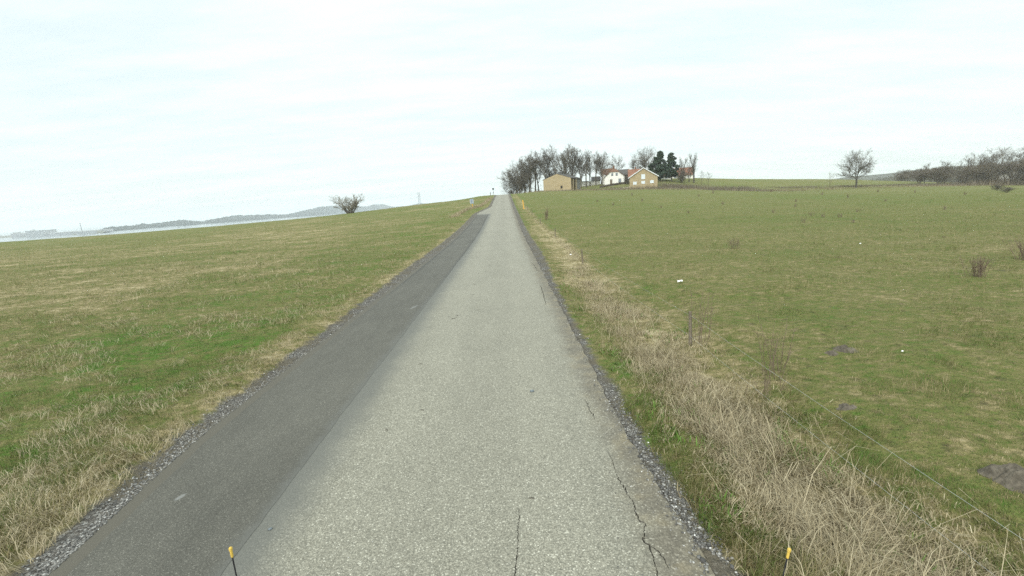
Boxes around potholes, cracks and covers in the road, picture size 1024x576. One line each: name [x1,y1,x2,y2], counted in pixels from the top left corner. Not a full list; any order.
crack [610,456,669,576]
